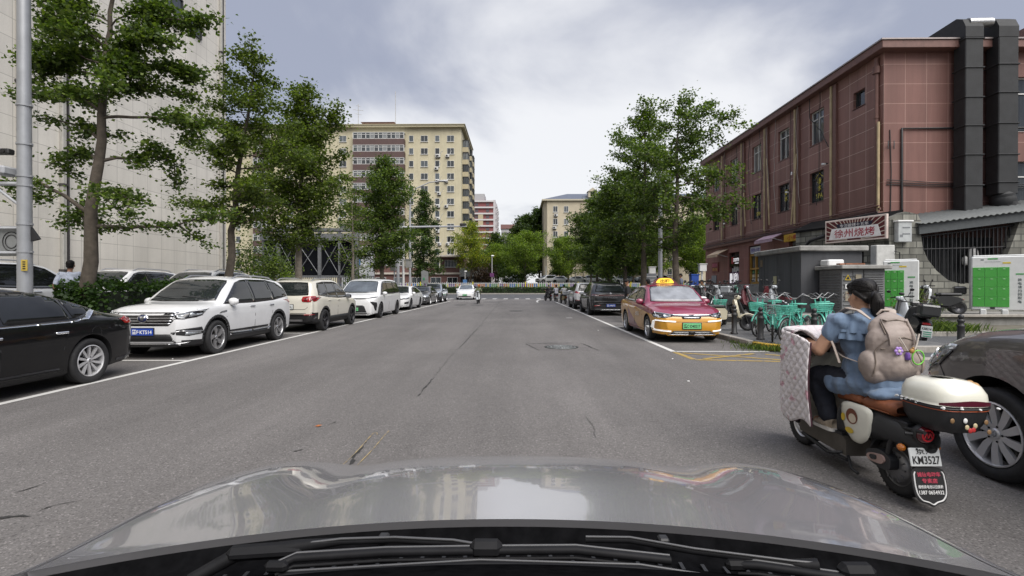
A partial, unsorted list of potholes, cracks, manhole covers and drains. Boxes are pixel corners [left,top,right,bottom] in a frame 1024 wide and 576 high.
crack [0,501,75,519]
